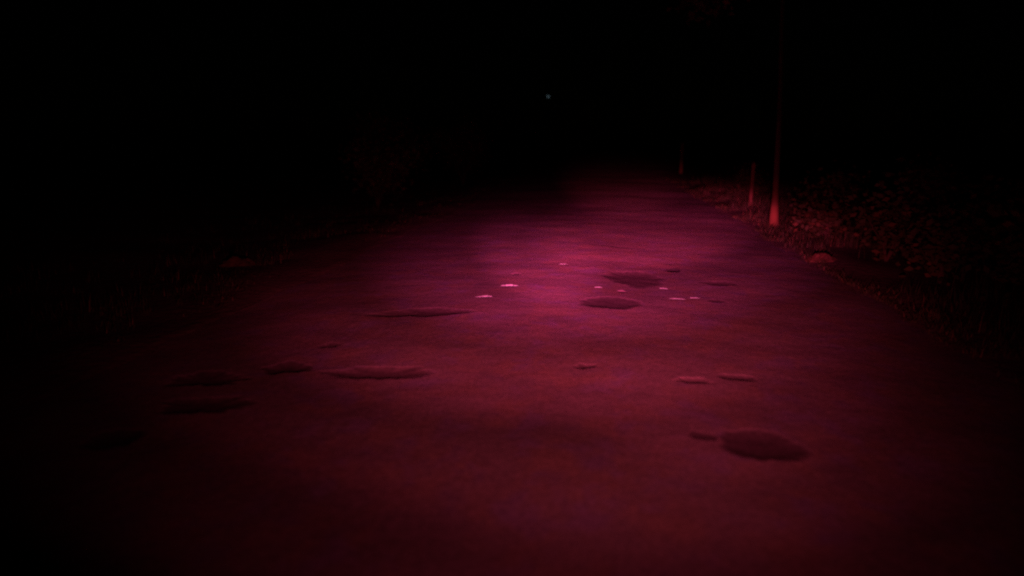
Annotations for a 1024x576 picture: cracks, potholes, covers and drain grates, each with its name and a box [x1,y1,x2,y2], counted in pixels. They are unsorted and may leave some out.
pothole [685,430,720,441]
pothole [577,296,646,310]
pothole [597,270,668,289]
pothole [715,428,814,462]
pothole [154,395,263,415]
pothole [315,366,439,380]
pothole [258,360,314,375]
pothole [362,307,479,317]
pothole [715,374,759,382]
pothole [70,427,149,451]
